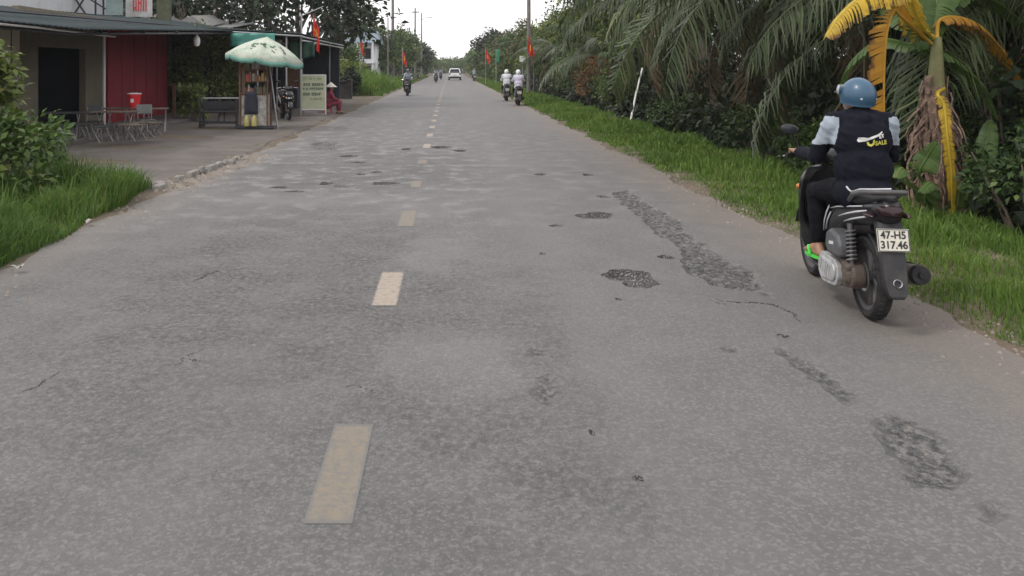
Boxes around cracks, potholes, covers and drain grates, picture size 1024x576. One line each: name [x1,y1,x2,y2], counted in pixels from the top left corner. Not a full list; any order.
crack [18,370,60,394]
crack [612,189,803,323]
pothole [601,269,661,288]
crack [159,348,207,366]
crack [191,270,221,282]
